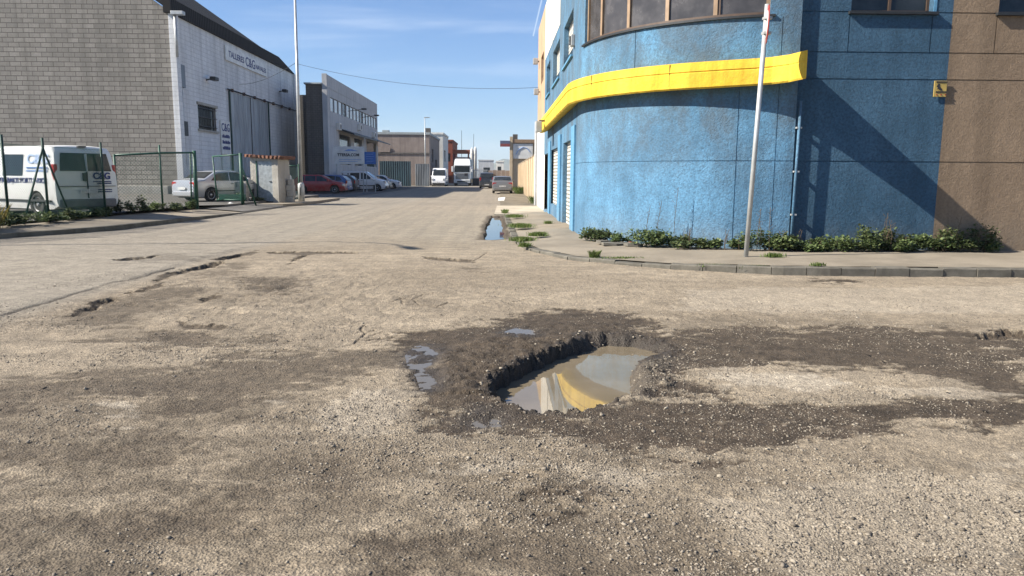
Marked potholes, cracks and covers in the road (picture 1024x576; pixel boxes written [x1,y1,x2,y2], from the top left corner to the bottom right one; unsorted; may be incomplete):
pothole [209,250,259,263]
pothole [67,297,119,317]
pothole [152,261,225,282]
pothole [486,331,682,414]
